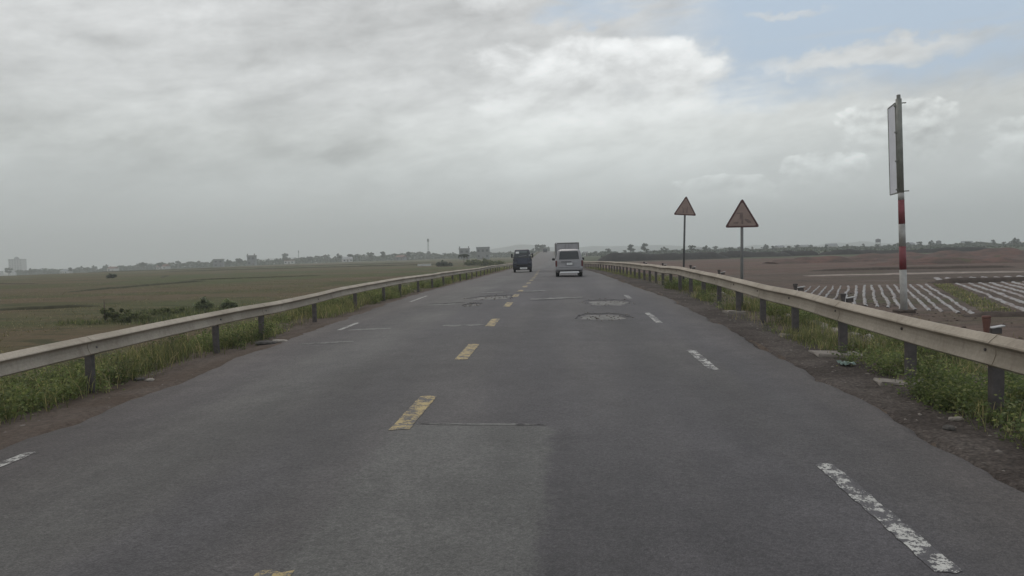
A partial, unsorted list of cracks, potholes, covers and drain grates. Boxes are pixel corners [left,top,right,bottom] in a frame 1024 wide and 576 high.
pothole [563,312,646,321]
pothole [574,298,642,307]
